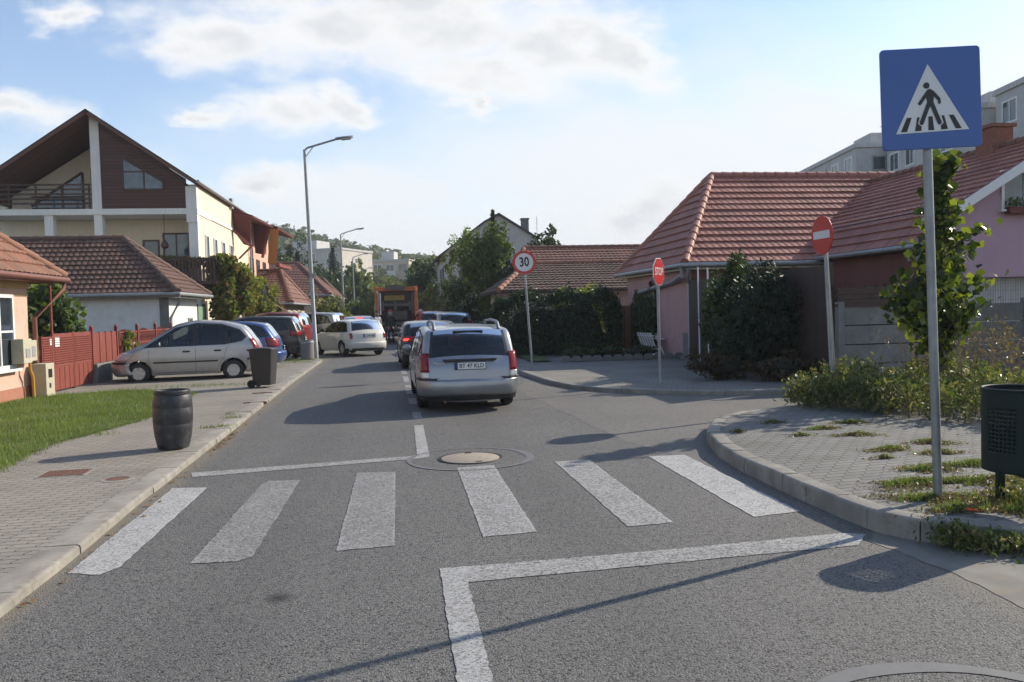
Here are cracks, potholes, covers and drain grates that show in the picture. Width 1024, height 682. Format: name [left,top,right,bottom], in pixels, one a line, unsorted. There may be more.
manhole cover [35,468,96,478]
manhole cover [817,662,1024,682]
manhole cover [407,447,534,470]
